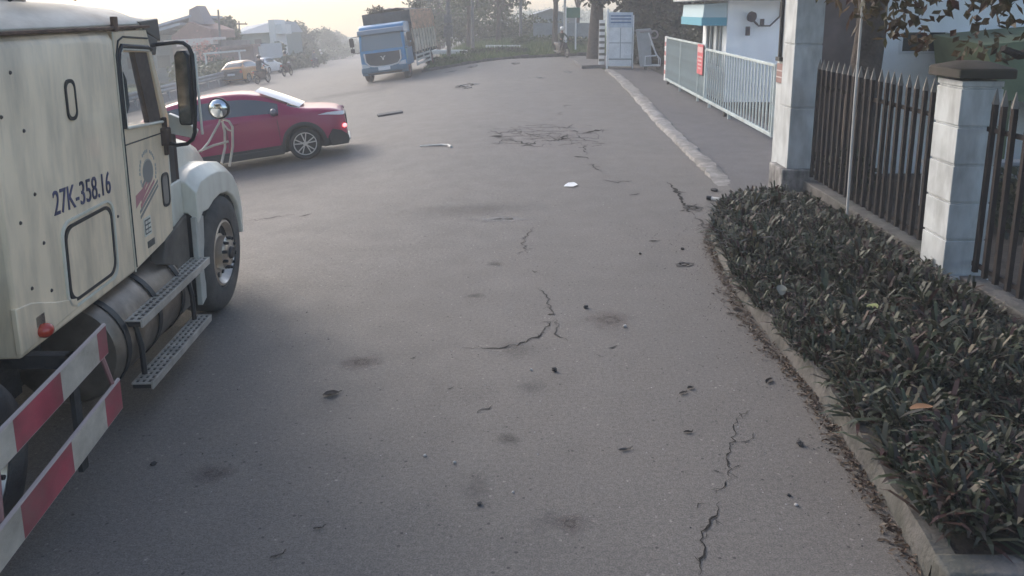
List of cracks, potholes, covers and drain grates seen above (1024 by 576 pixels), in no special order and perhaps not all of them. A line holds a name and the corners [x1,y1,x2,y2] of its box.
crack [667,182,708,233]
crack [491,105,640,195]
crack [462,290,568,349]
crack [695,410,754,574]
